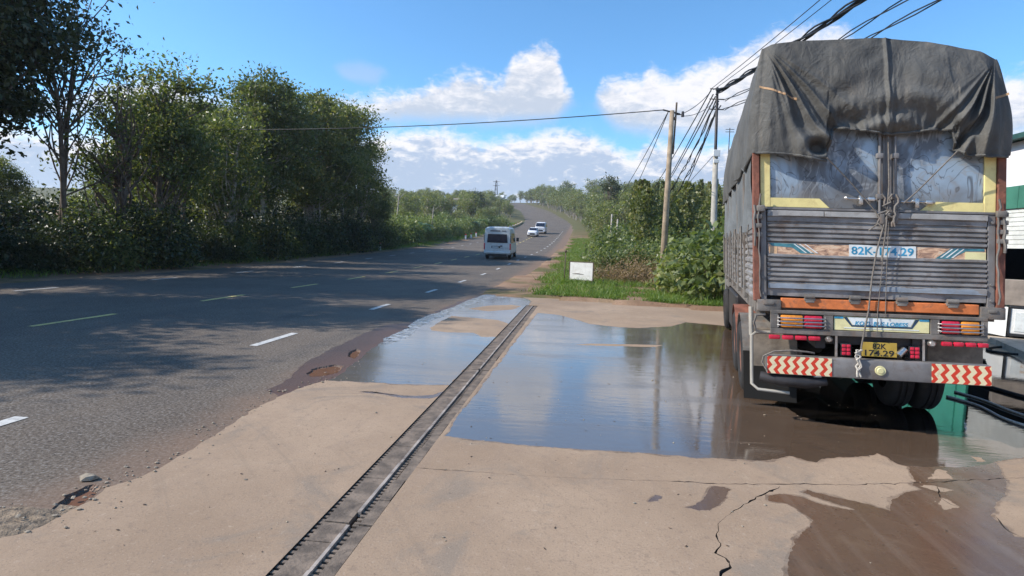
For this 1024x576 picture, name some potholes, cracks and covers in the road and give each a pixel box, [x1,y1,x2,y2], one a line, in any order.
pothole [51,484,102,510]
crack [425,468,1002,576]
pothole [306,365,343,377]
